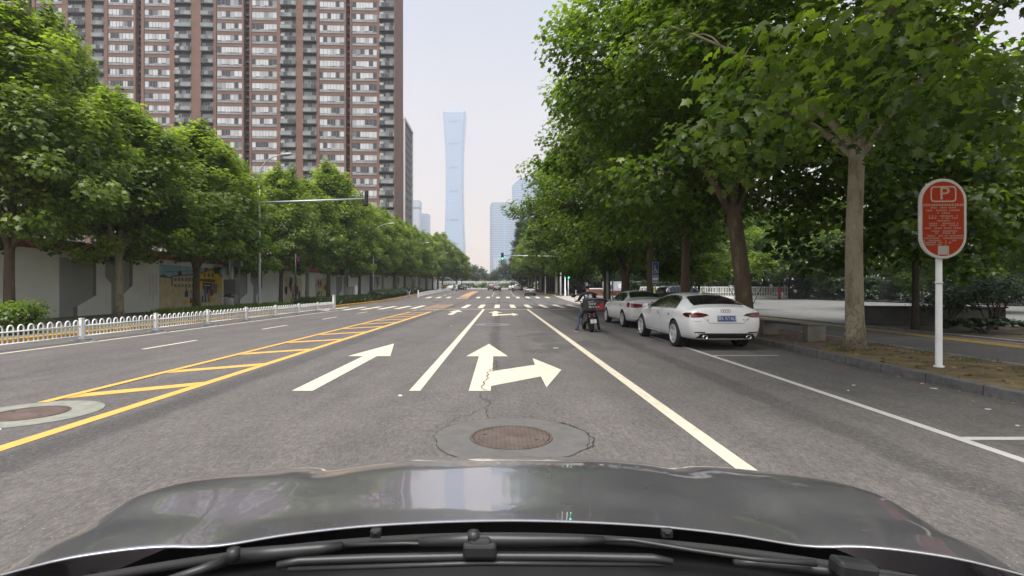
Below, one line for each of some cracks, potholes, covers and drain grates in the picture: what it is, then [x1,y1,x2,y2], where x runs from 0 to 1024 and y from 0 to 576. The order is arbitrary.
manhole cover [0,400,106,428]
crack [435,359,571,427]
manhole cover [434,418,590,457]
